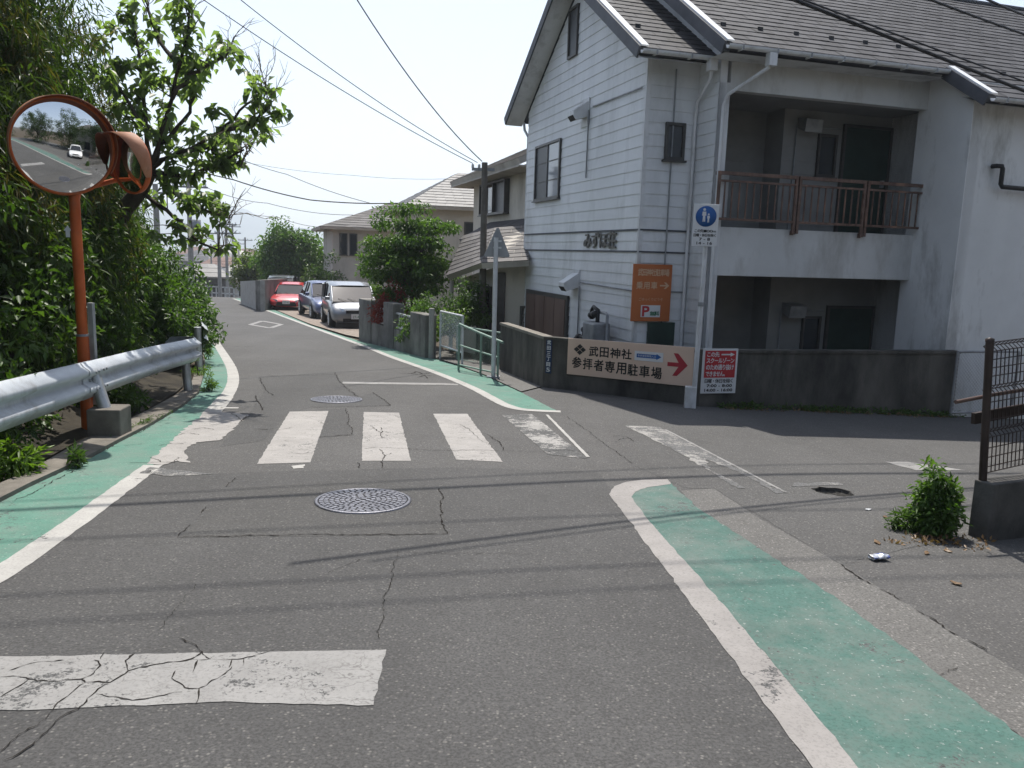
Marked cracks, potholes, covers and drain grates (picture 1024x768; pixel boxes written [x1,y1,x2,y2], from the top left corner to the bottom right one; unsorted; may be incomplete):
crack [0,637,272,760]
pothole [811,486,855,496]
crack [841,564,987,651]
manhole cover [314,488,411,514]
